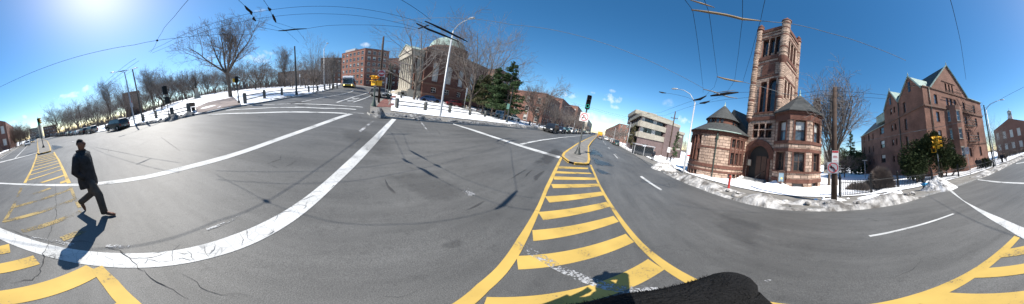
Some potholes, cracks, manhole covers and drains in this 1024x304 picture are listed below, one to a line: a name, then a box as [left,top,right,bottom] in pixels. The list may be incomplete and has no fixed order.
crack [108,244,246,297]
